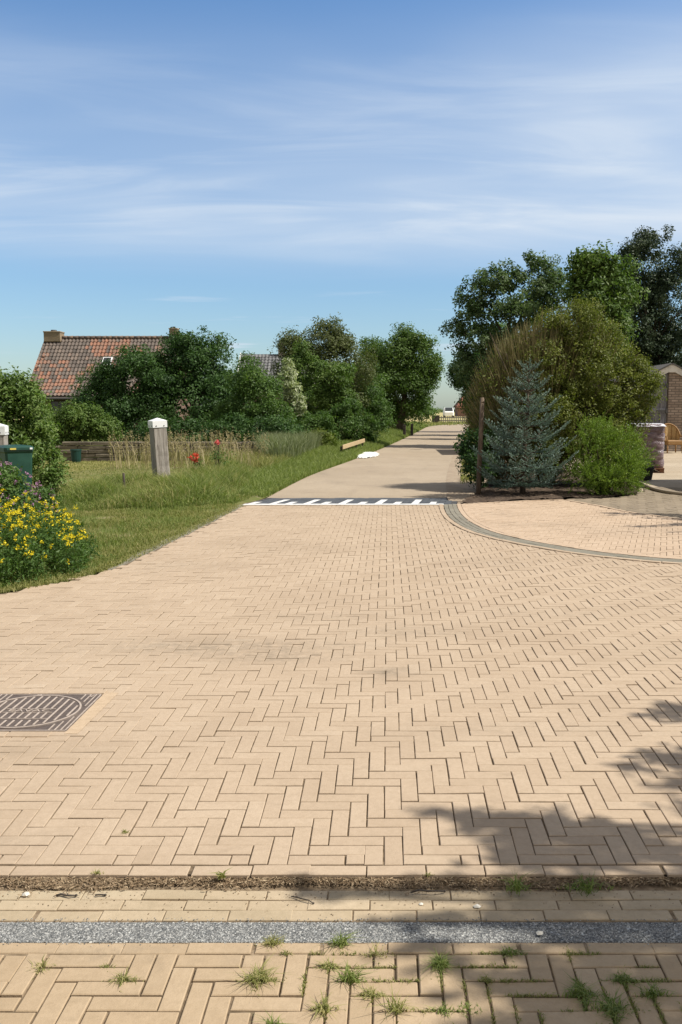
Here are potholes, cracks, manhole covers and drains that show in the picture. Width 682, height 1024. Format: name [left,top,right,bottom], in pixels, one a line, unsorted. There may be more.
manhole cover [0,694,102,732]
